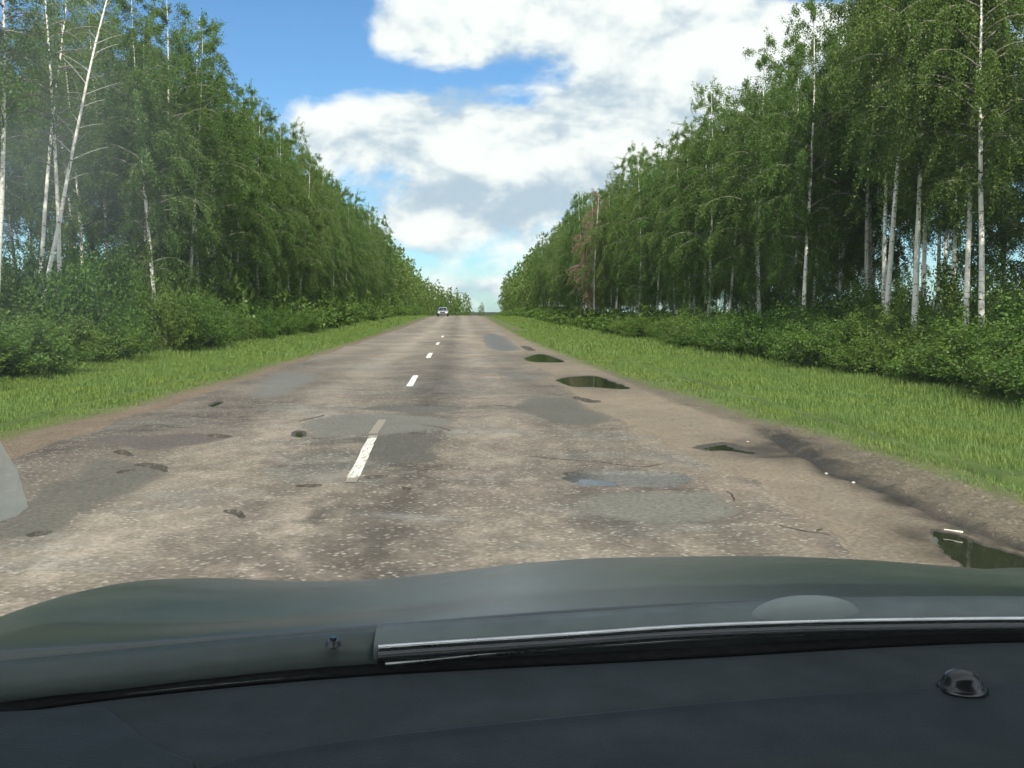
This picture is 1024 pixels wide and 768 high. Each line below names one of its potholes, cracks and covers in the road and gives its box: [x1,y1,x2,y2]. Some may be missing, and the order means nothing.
pothole [692,442,767,455]
pothole [134,463,168,472]
pothole [524,354,565,362]
pothole [554,376,631,389]
crack [774,524,832,536]
pothole [223,509,246,519]
pothole [930,528,1024,569]
